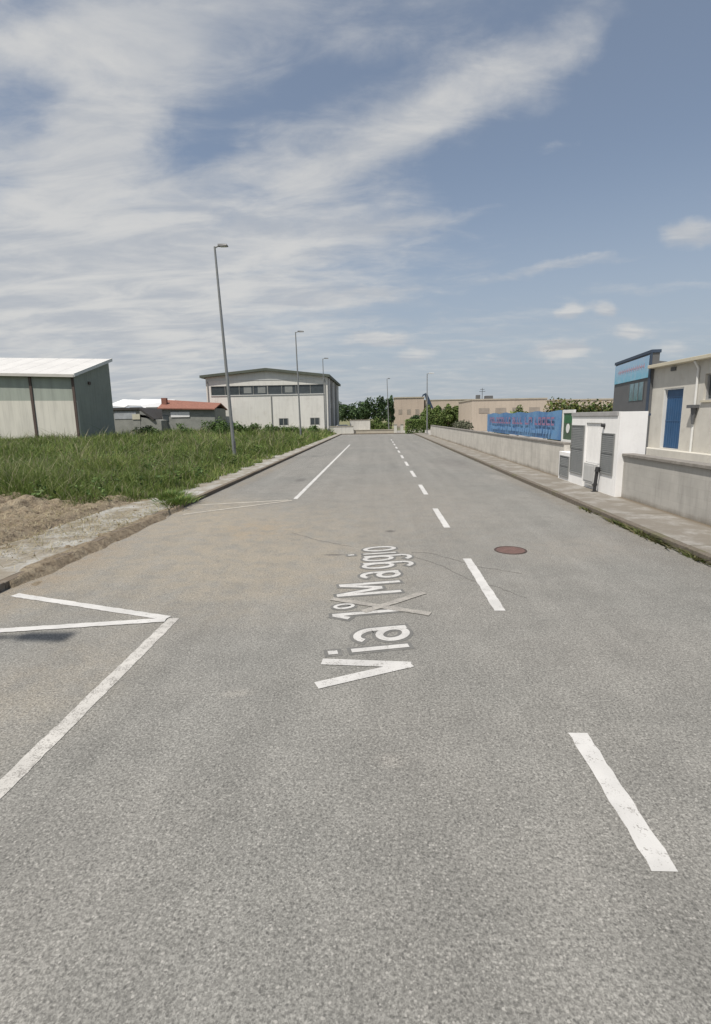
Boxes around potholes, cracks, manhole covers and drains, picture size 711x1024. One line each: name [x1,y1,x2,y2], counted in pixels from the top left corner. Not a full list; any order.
manhole cover [494,546,527,555]
crack [294,533,526,598]
